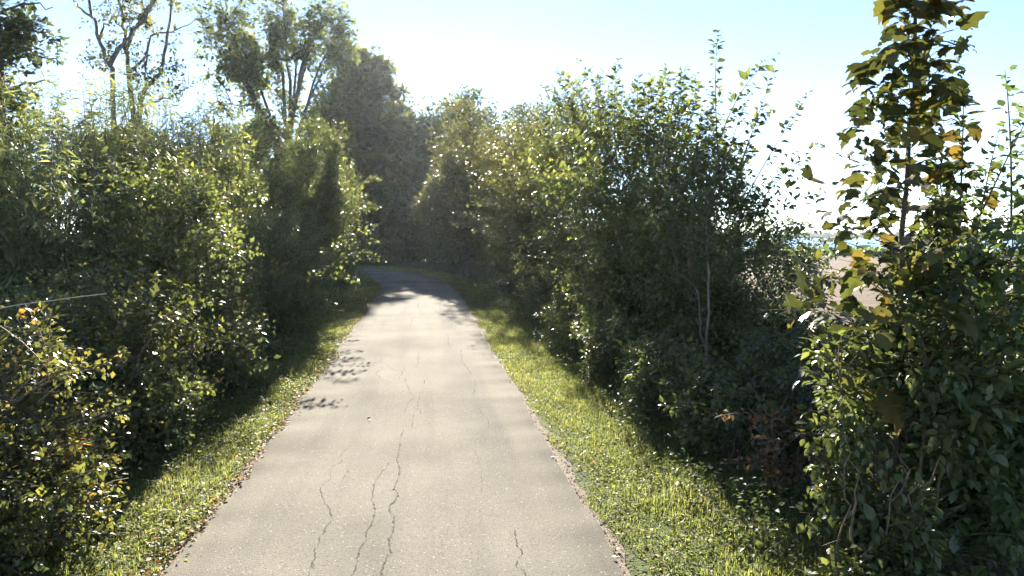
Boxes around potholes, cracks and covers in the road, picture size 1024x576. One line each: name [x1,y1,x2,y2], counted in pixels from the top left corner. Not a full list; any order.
crack [308,448,348,576]
crack [439,304,489,428]
crack [351,353,425,576]
